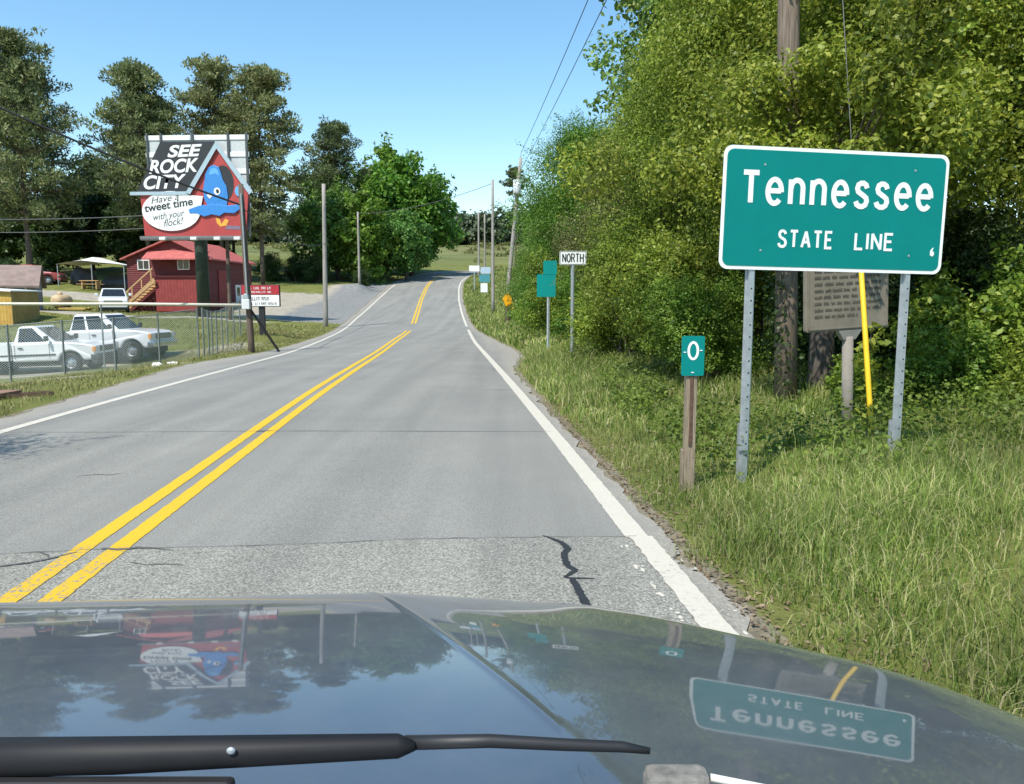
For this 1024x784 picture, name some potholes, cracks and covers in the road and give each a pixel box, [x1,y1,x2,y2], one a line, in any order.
crack [101,546,180,565]
crack [0,551,77,566]
